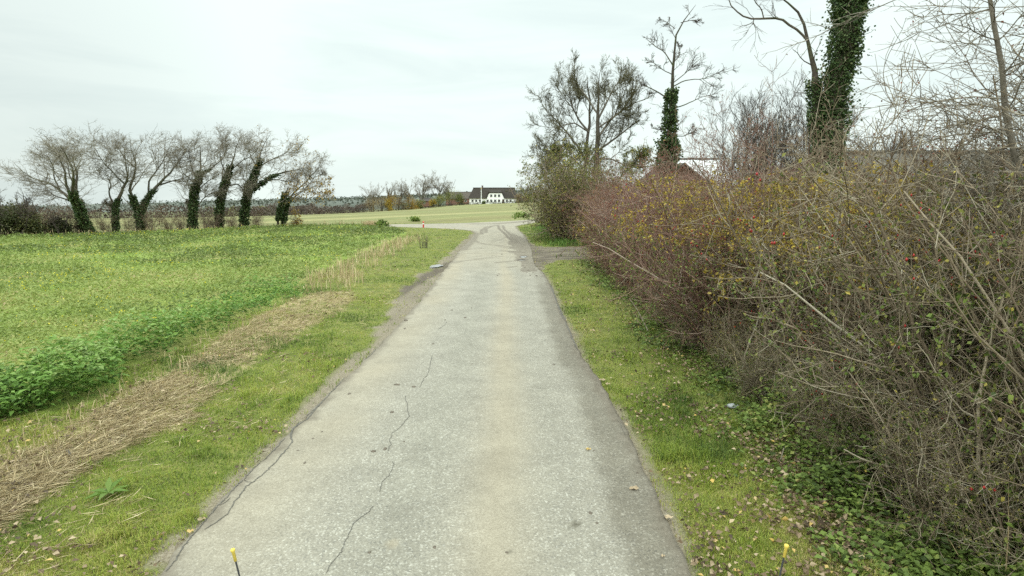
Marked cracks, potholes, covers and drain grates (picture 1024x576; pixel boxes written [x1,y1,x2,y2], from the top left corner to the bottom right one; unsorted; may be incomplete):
crack [165,377,345,572]
crack [326,358,432,573]
